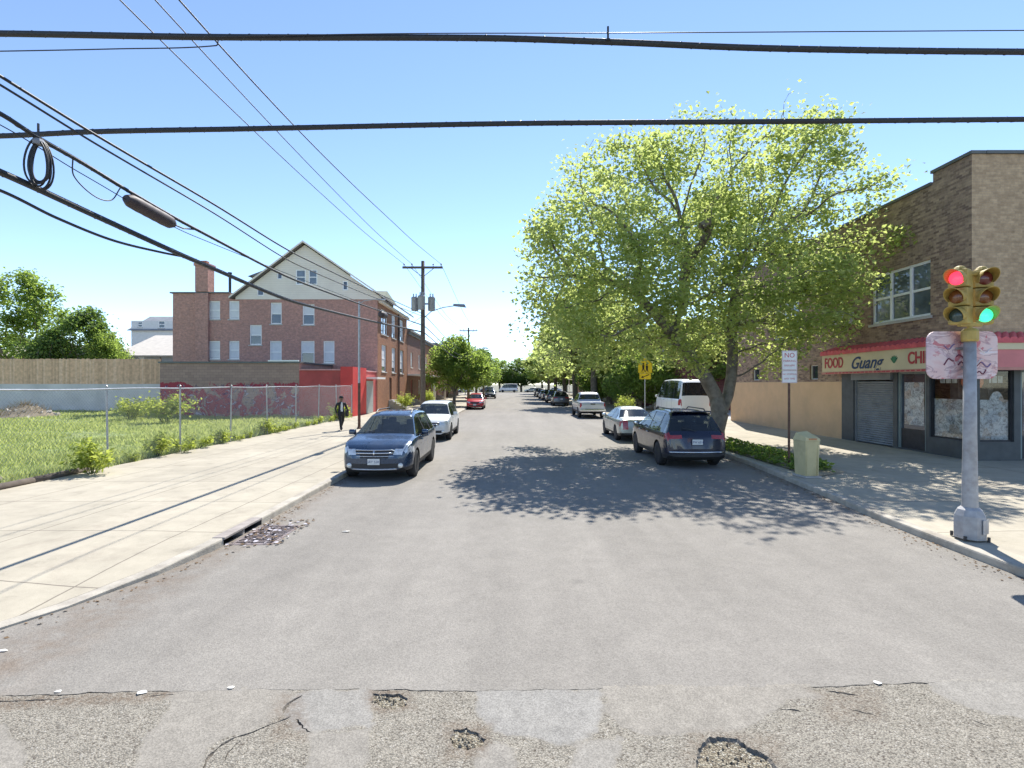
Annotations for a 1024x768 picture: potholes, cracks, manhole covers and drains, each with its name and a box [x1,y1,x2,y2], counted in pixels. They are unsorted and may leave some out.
crack [828,691,876,716]
pothole [371,694,408,710]
pothole [450,728,486,750]
crack [203,695,310,768]
pothole [696,736,777,768]
drain grate [212,517,314,546]
